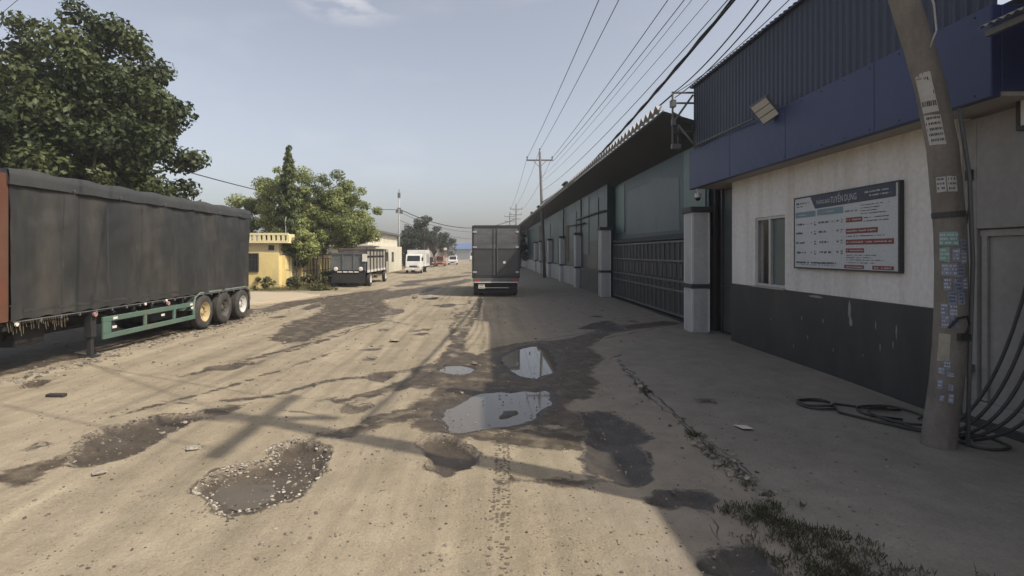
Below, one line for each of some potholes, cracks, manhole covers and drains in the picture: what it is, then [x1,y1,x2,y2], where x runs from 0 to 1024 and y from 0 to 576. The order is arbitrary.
crack [495,323,762,497]
pothole [495,344,564,380]
pothole [415,433,481,477]
pothole [66,410,205,468]
pothole [430,386,559,435]
pothole [20,378,55,388]
pothole [174,436,342,518]
